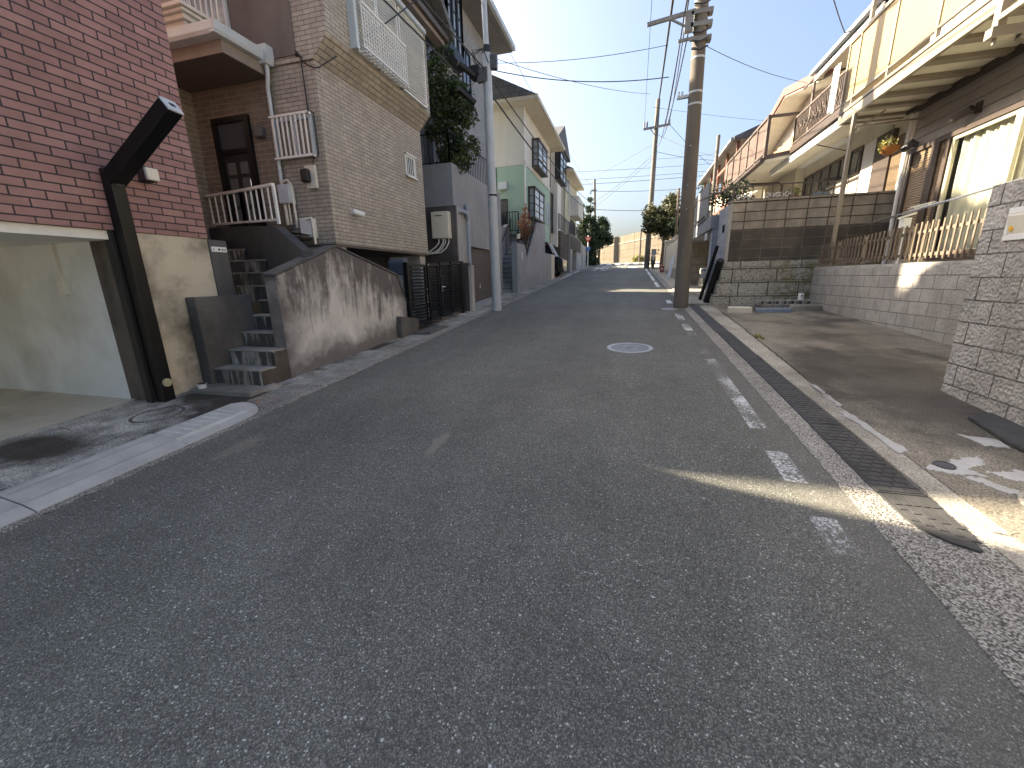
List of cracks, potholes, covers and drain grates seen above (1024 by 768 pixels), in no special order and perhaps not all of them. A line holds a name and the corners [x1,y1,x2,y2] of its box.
manhole cover [932,460,957,470]
manhole cover [607,343,653,353]
manhole cover [124,405,189,425]
